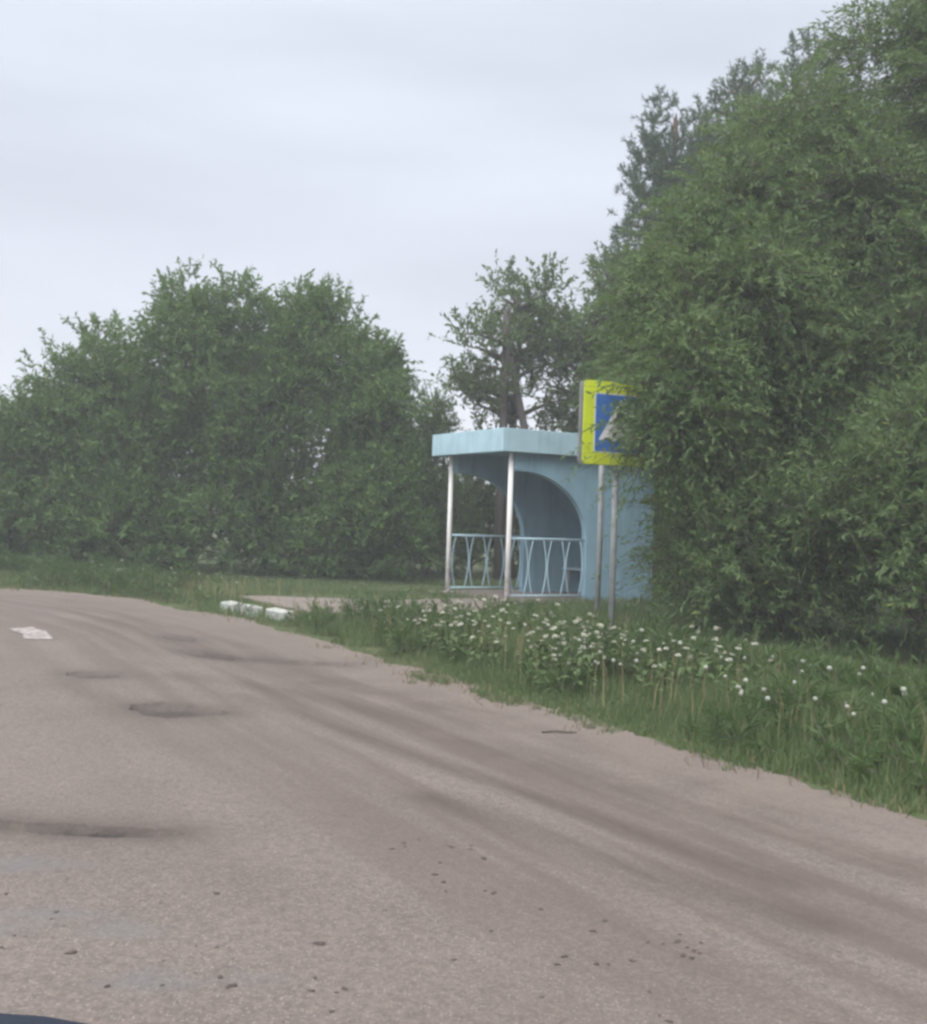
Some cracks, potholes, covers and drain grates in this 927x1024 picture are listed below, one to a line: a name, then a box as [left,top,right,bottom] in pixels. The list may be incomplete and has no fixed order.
pothole [0,819,186,838]
pothole [129,702,228,718]
